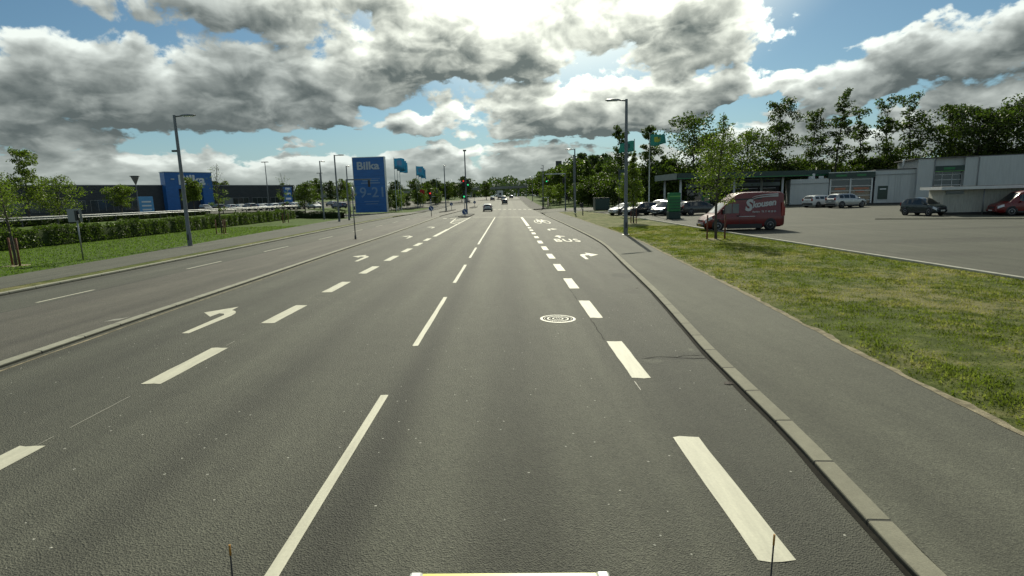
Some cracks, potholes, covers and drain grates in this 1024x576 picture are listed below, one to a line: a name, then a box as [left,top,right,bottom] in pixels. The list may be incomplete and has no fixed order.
manhole cover [540,315,576,323]
